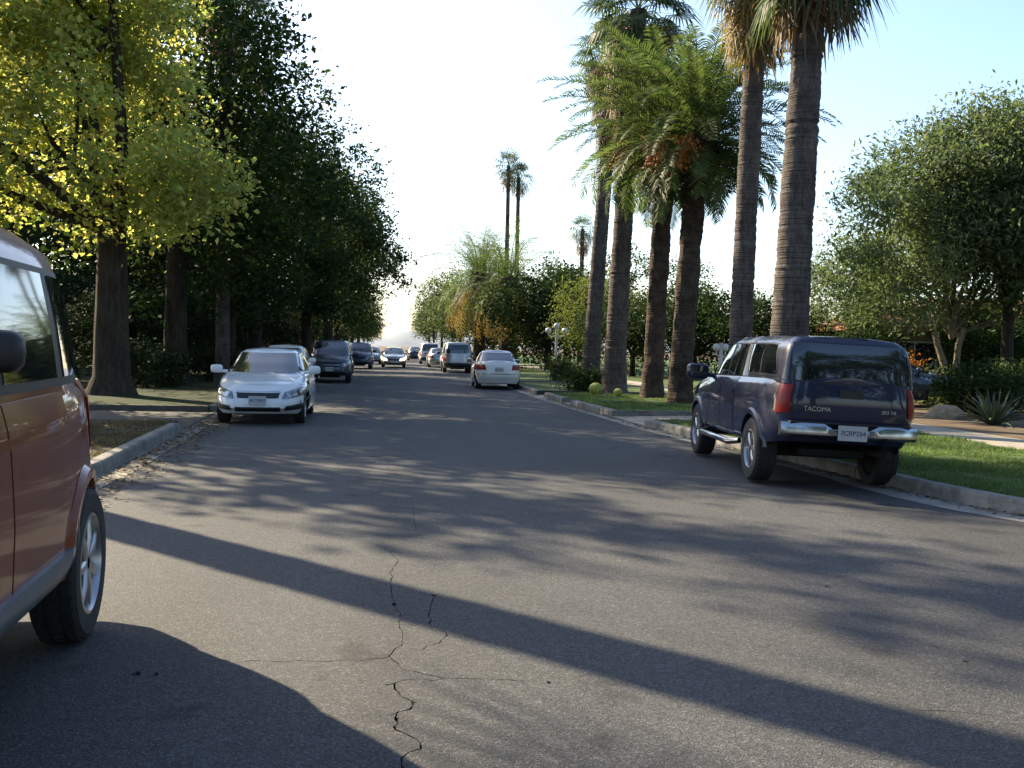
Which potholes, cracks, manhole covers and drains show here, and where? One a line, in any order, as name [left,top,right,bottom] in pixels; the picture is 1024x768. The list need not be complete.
crack [255,544,517,768]
